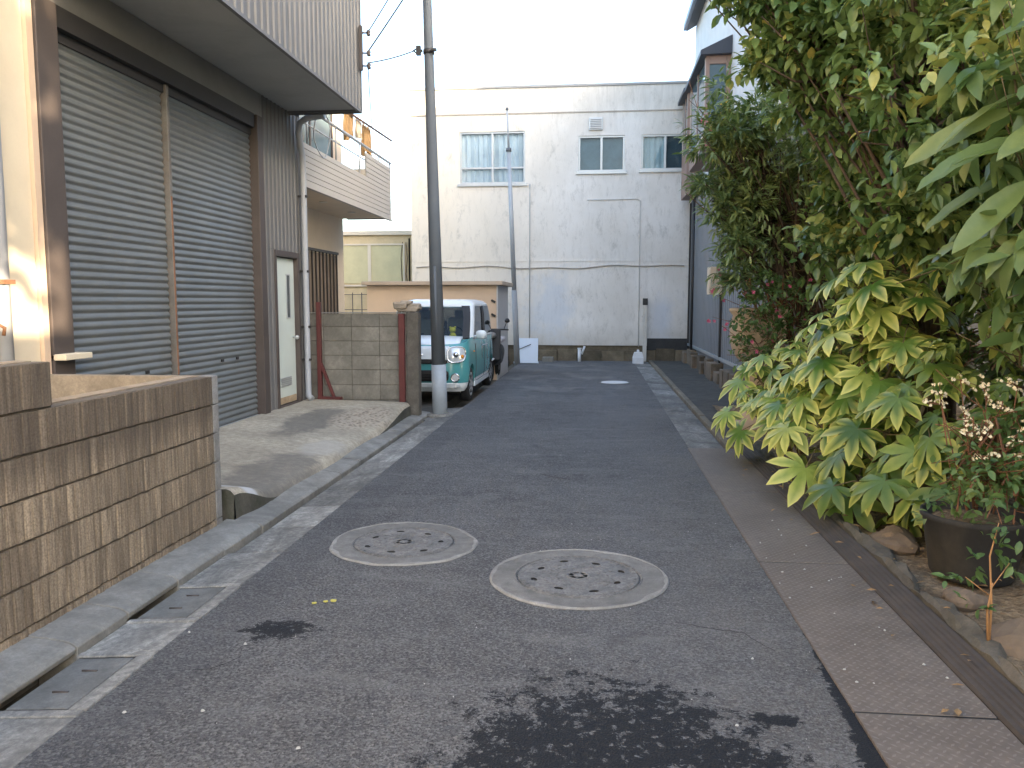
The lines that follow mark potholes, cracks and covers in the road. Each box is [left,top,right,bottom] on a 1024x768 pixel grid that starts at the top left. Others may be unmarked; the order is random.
manhole cover [489,549,669,610]
manhole cover [329,522,478,566]
